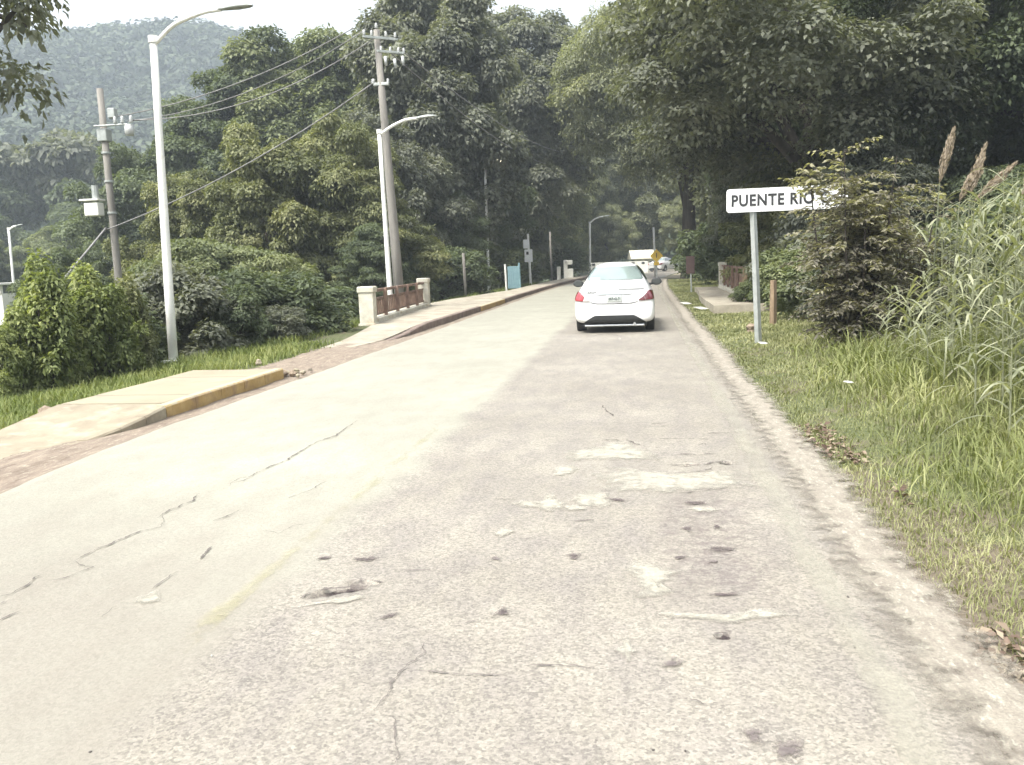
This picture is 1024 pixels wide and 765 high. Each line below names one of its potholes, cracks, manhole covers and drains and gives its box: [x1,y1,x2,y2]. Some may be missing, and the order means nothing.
pothole [322,584,364,597]
crack [230,421,356,484]
crack [376,637,500,762]
crack [0,493,199,620]
pothole [774,737,804,760]
